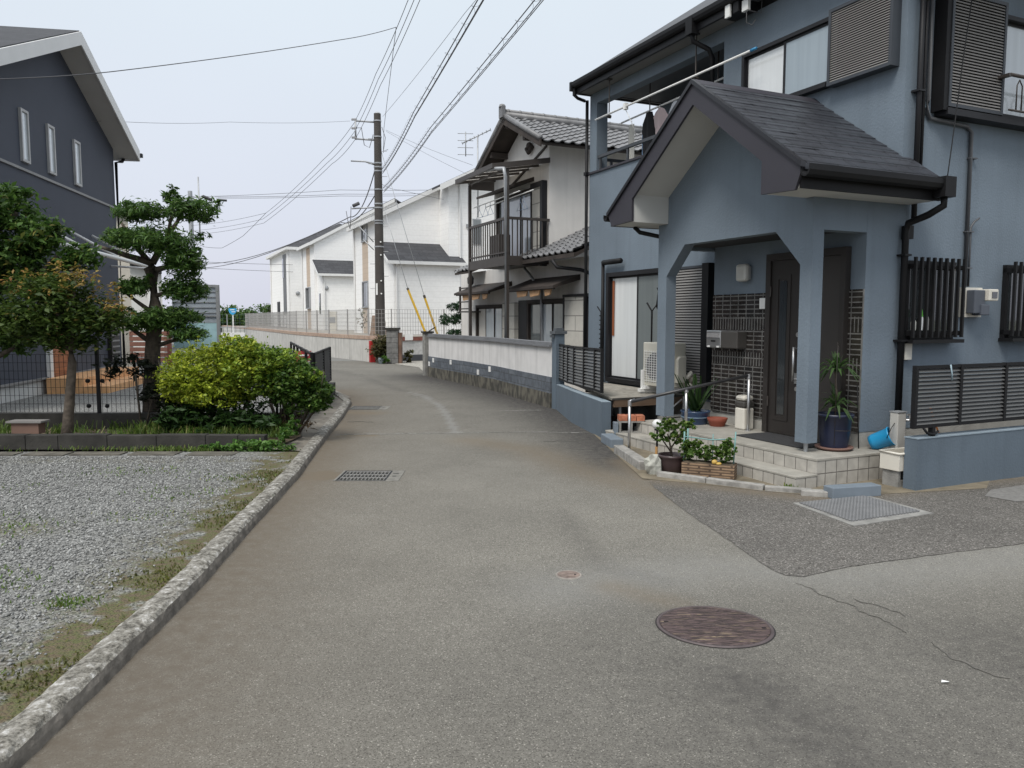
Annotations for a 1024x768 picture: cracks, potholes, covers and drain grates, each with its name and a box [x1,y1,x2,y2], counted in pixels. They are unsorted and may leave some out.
manhole cover [793,495,934,527]
crack [796,583,1010,679]
manhole cover [556,570,582,580]
drain grate [333,471,405,481]
manhole cover [655,606,776,649]
